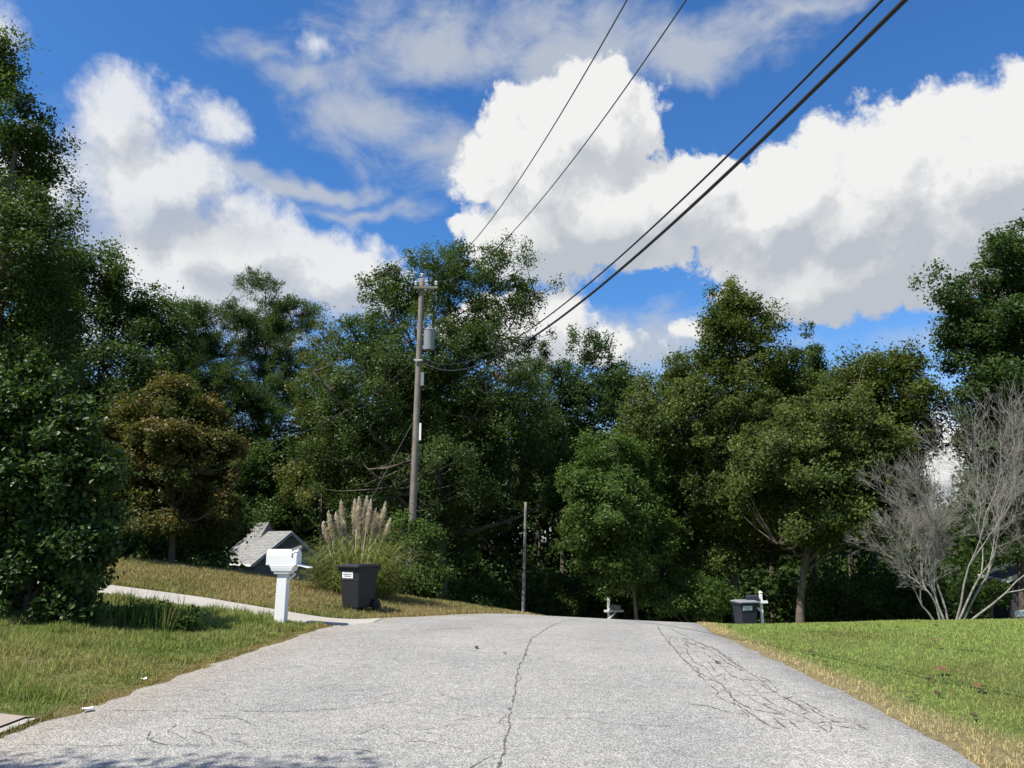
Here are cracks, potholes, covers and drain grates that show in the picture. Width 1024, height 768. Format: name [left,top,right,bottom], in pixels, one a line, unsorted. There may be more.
crack [470,619,575,768]
crack [658,627,866,732]
